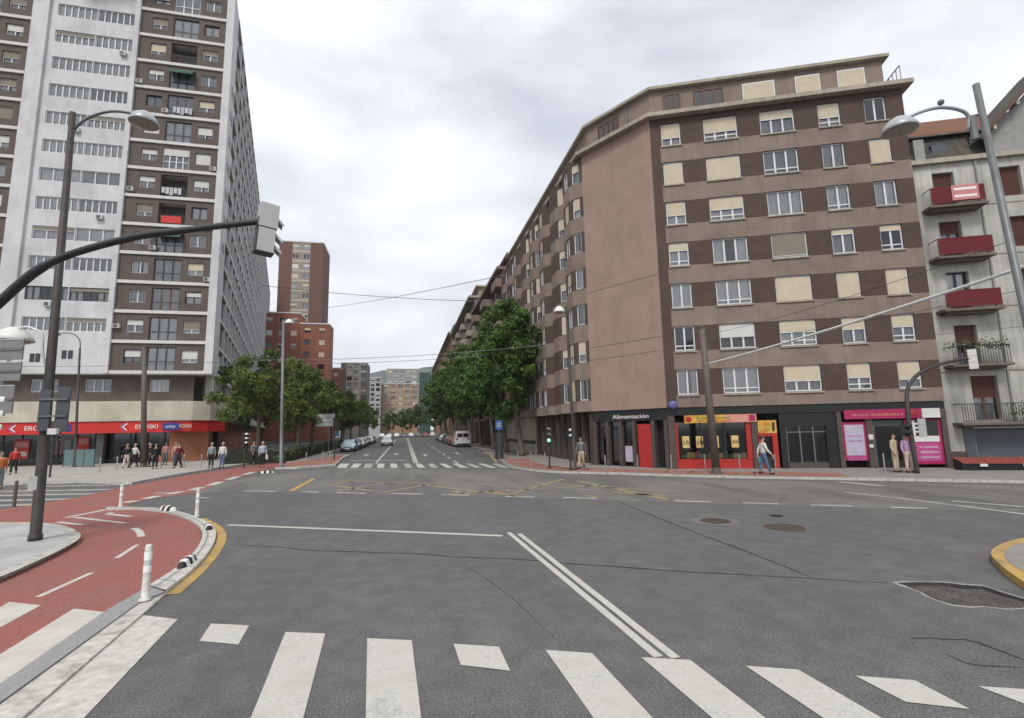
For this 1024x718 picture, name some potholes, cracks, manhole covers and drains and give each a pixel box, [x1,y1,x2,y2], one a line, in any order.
manhole cover [764,523,806,531]
crack [928,637,1024,668]
manhole cover [691,517,740,526]
pothole [893,581,1024,610]
